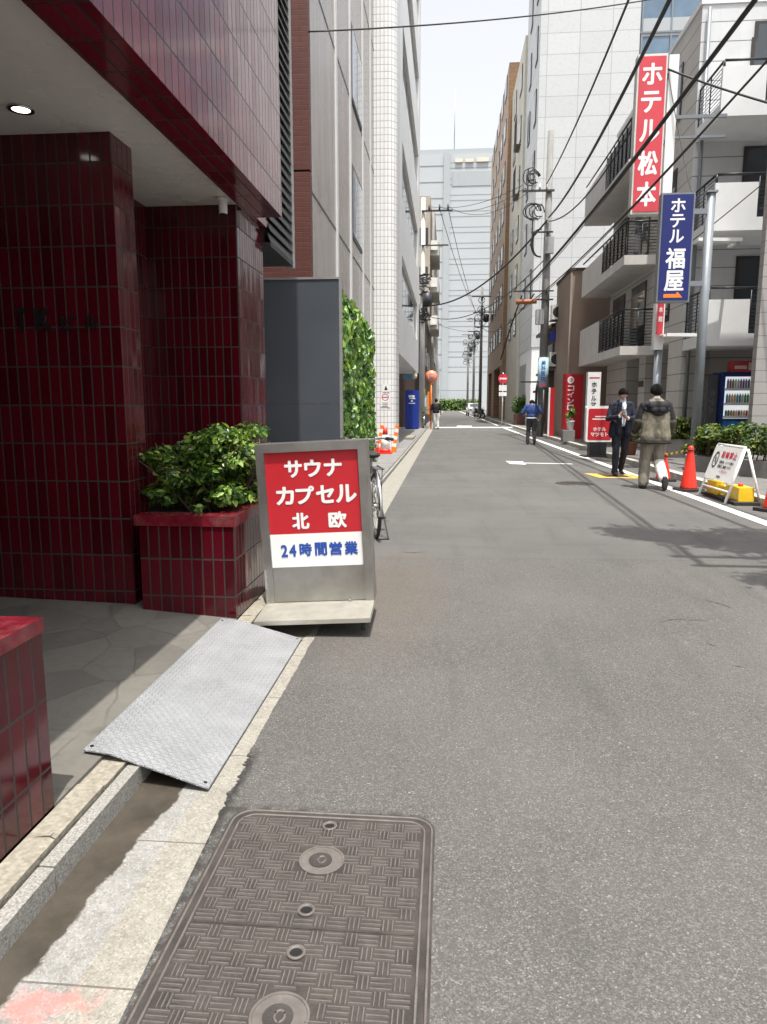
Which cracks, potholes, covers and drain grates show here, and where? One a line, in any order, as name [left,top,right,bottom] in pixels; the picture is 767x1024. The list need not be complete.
manhole cover [123,809,435,1024]
